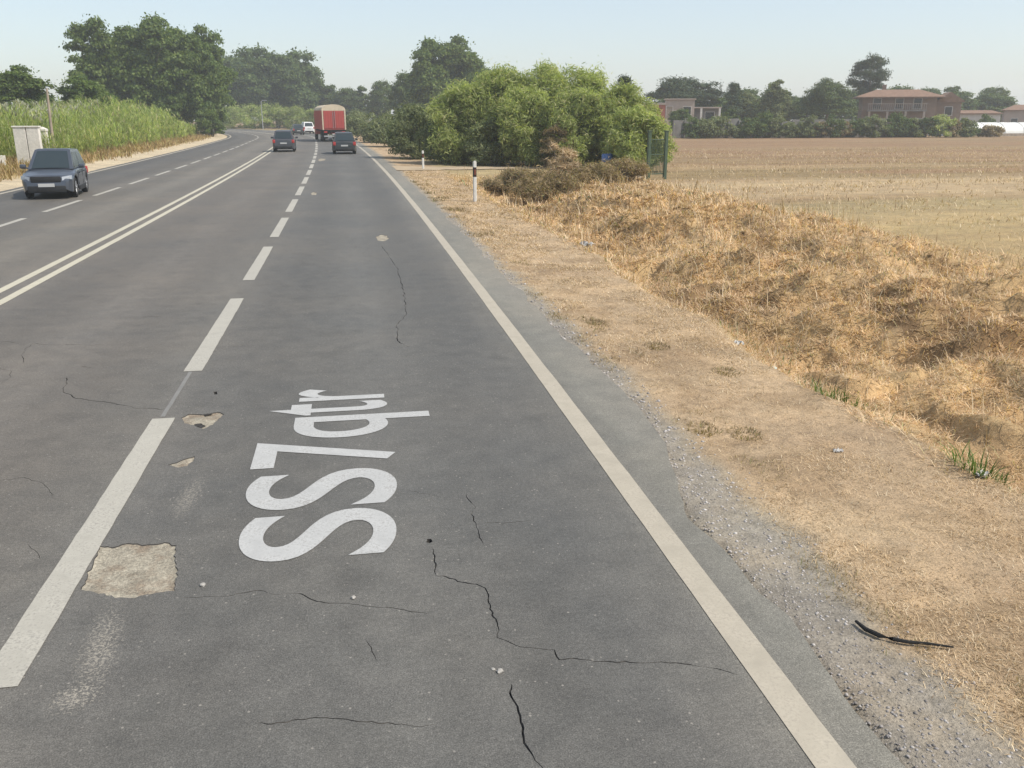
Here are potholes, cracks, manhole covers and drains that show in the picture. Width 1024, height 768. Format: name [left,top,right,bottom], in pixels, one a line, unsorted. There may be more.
pothole [169,456,195,467]
crack [382,247,407,343]
pothole [181,412,224,429]
crack [432,549,737,675]
crack [260,717,428,727]
crack [63,366,155,409]
crack [509,684,543,768]
